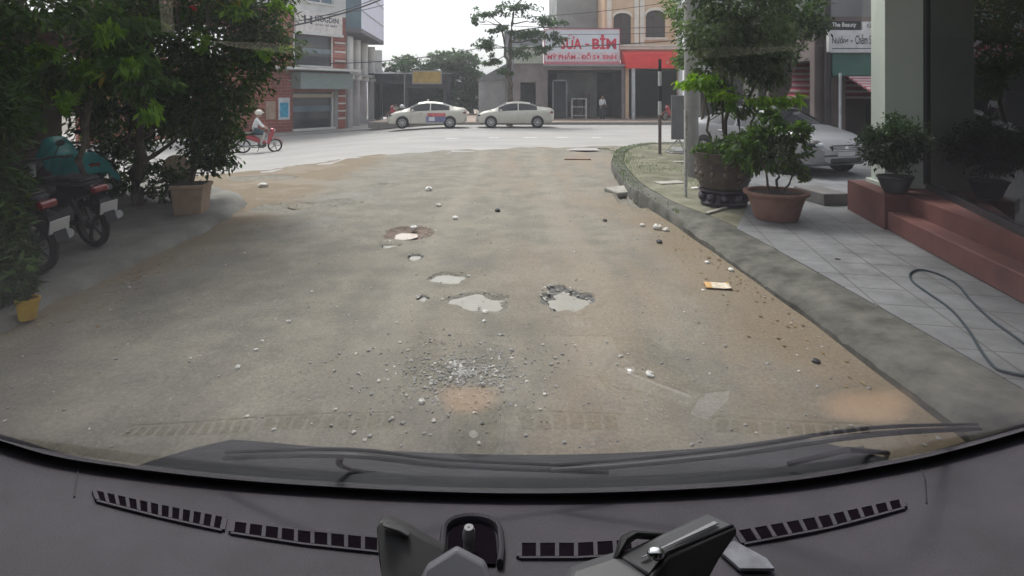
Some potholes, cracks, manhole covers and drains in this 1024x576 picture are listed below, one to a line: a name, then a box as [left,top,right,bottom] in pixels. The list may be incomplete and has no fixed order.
pothole [416,270,479,287]
pothole [528,281,608,317]
pothole [398,252,432,264]
pothole [375,225,442,245]
pothole [434,288,519,316]
